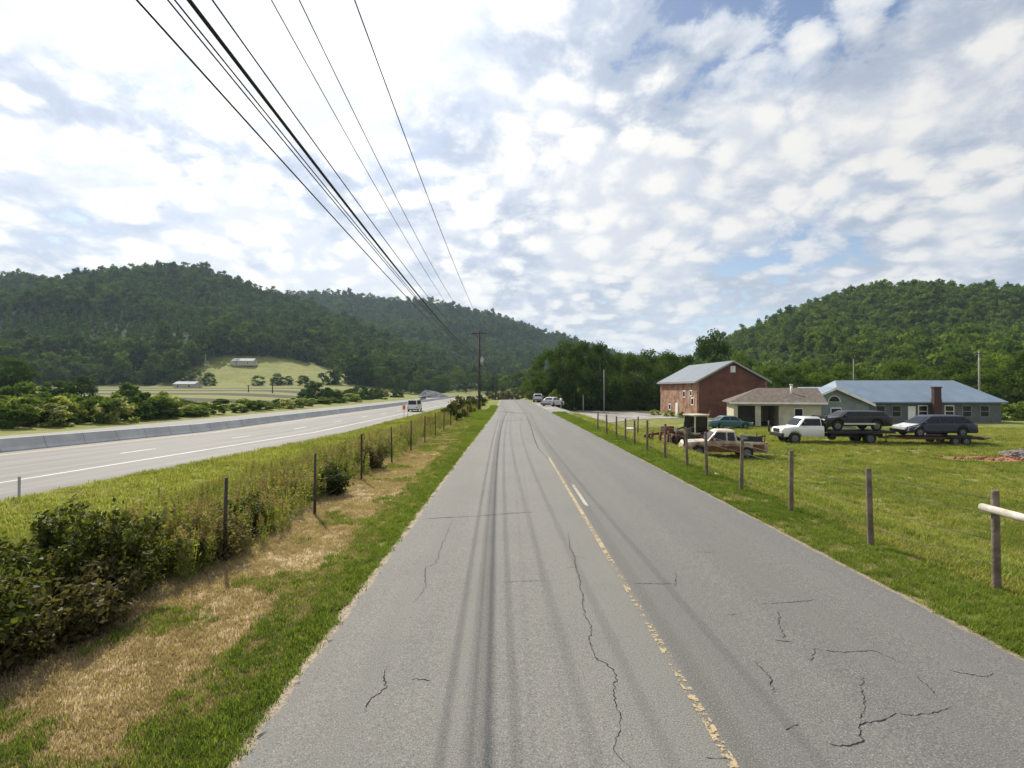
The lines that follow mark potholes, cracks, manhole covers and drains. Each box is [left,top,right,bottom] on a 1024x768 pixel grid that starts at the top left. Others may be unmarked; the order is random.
crack [765,600,896,661]
crack [568,536,631,768]
crack [830,676,950,746]
